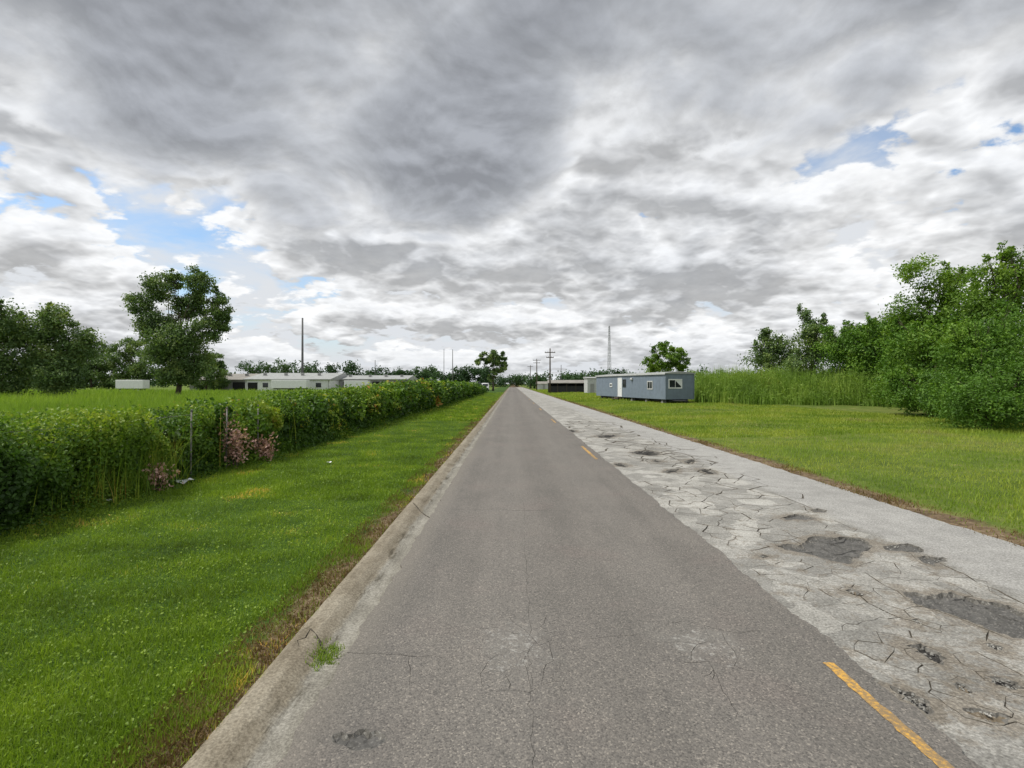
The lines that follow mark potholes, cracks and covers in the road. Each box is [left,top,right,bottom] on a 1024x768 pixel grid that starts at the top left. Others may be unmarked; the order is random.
pothole [883,543,924,553]
crack [567,421,1024,726]
pothole [962,708,1010,725]
pothole [988,676,1024,690]
pothole [332,728,388,751]
pothole [918,556,947,566]
pothole [890,685,934,714]
crack [297,629,325,654]
pothole [906,643,947,665]
pothole [778,536,873,564]
crack [458,503,638,768]
pothole [902,591,1024,639]
